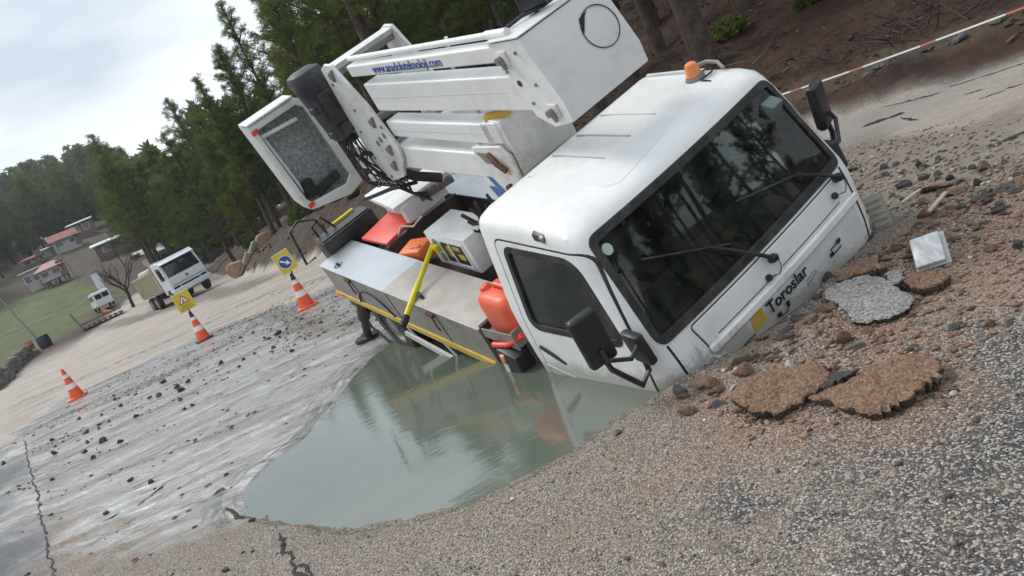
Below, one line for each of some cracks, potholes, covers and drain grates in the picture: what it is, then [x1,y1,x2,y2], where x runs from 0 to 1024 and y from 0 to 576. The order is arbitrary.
crack [884,63,1024,121]
crack [278,532,313,576]
crack [23,440,57,576]
pothole [256,284,823,534]
